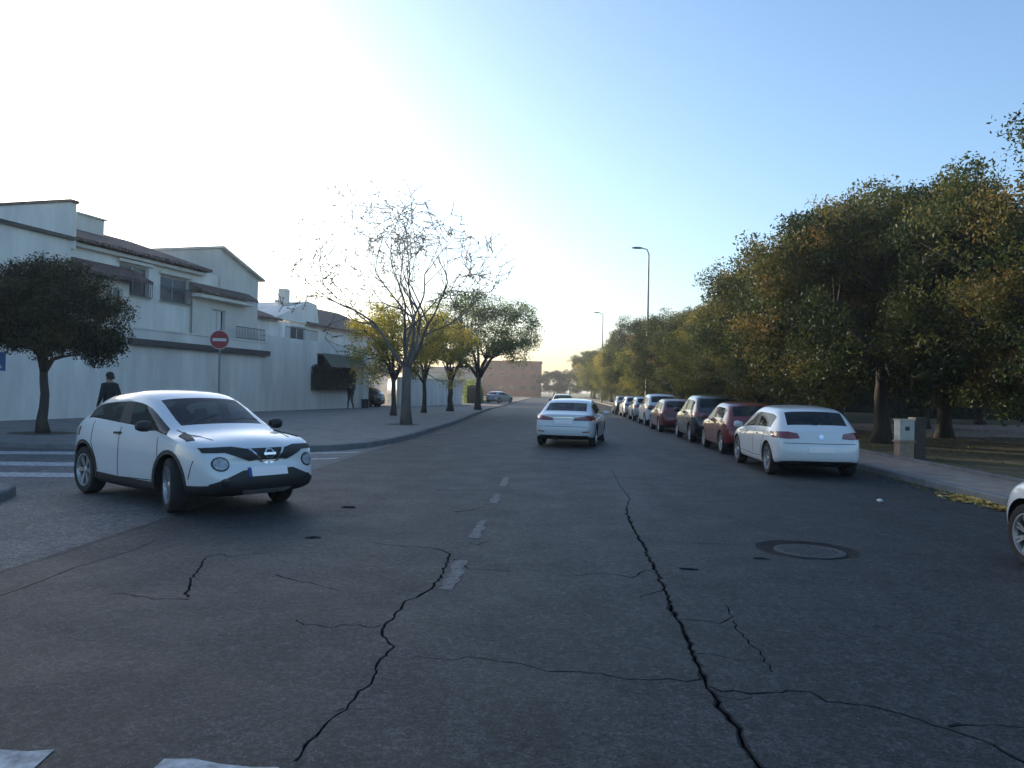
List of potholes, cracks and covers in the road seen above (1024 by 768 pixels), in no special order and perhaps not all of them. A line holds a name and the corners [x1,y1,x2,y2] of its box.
crack [275,469,1024,768]
manhole cover [755,540,859,560]
crack [114,553,259,600]
